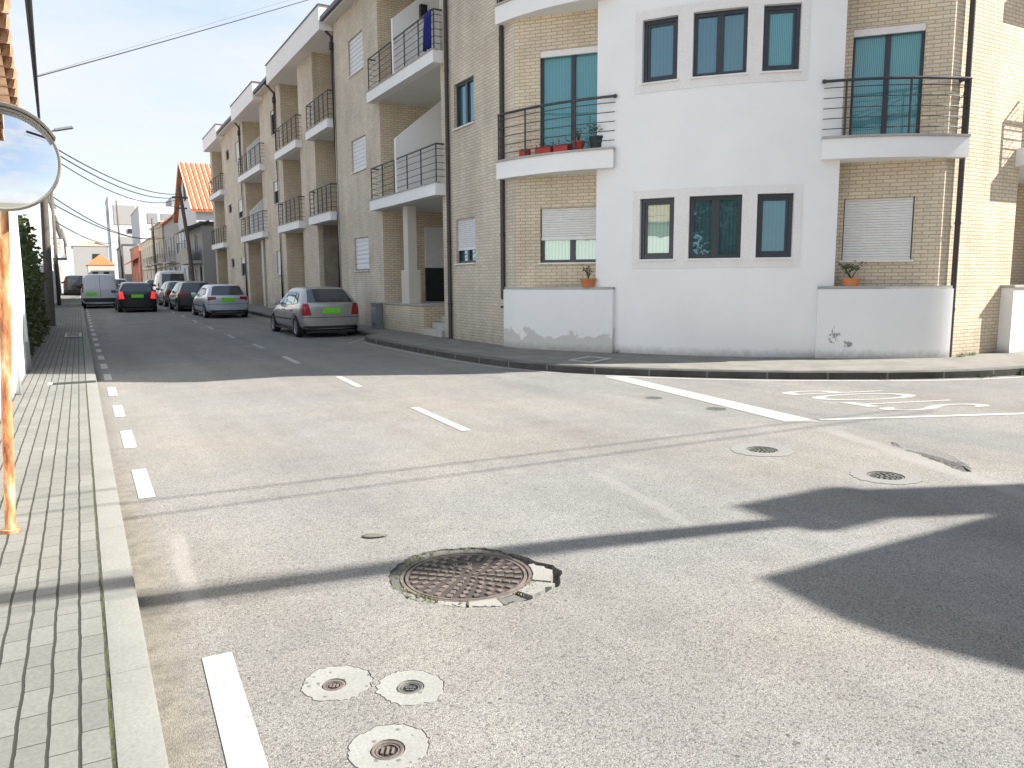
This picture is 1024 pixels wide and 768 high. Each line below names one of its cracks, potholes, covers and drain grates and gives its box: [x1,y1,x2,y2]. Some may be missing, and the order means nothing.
pothole [890,442,972,472]
manhole cover [388,547,562,608]
